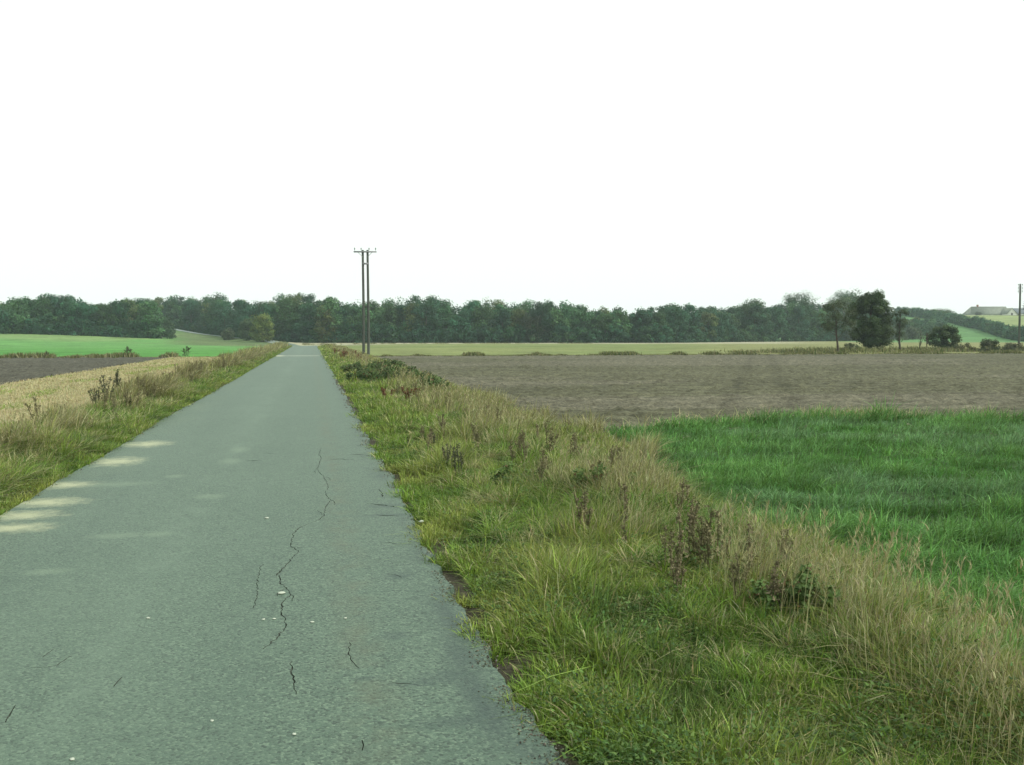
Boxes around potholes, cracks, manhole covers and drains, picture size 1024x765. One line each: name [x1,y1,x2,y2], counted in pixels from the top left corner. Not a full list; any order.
crack [253,450,335,649]
